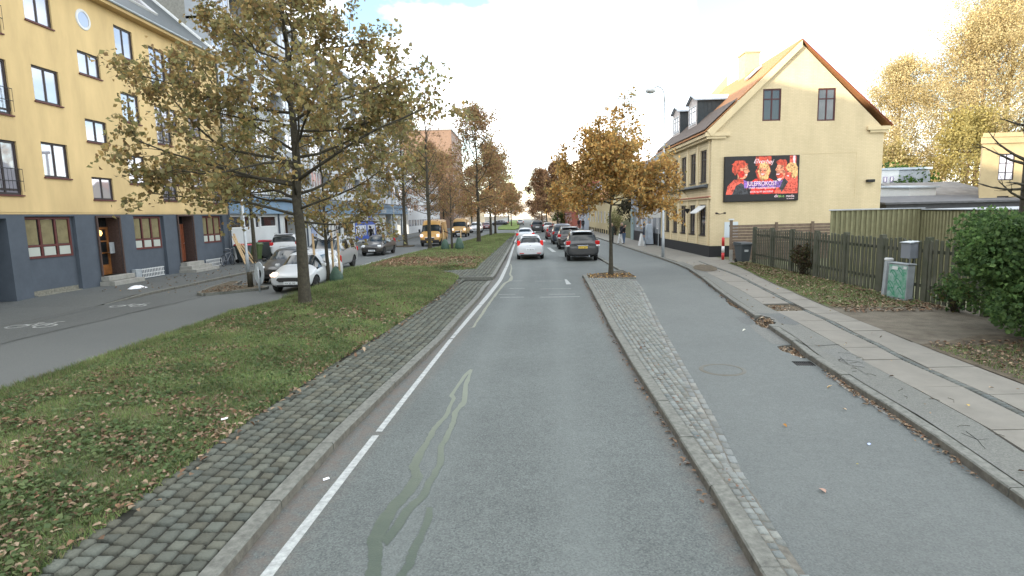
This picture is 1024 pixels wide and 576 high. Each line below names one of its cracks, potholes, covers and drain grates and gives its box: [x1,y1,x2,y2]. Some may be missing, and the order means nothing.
manhole cover [699,364,747,376]
